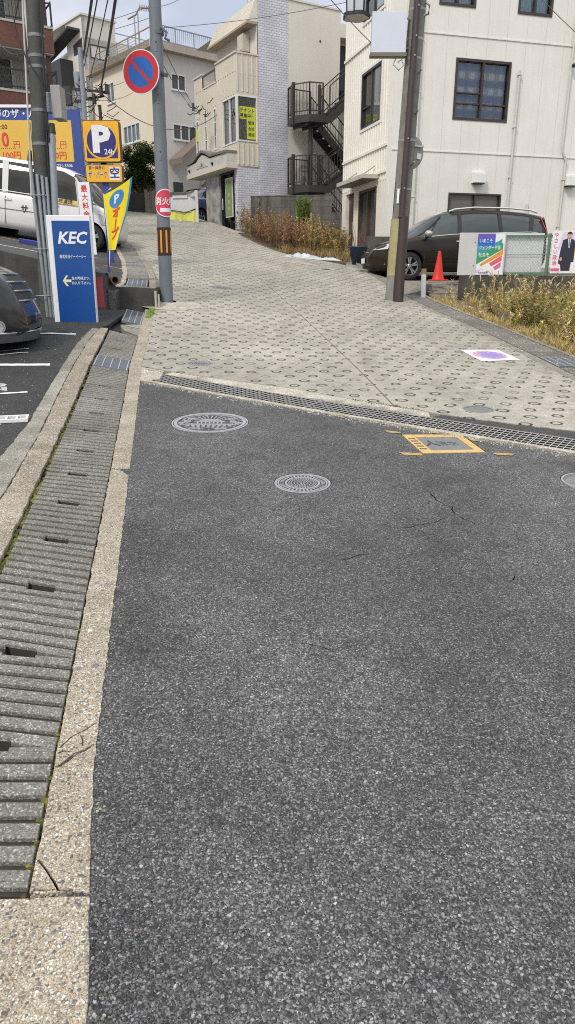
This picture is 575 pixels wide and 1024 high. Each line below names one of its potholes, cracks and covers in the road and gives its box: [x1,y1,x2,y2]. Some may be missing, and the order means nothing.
drain grate [92,355,130,372]
crack [407,490,477,528]
manhole cover [171,413,248,433]
manhole cover [561,473,575,487]
manhole cover [274,474,331,493]
utility cover [402,435,485,454]
